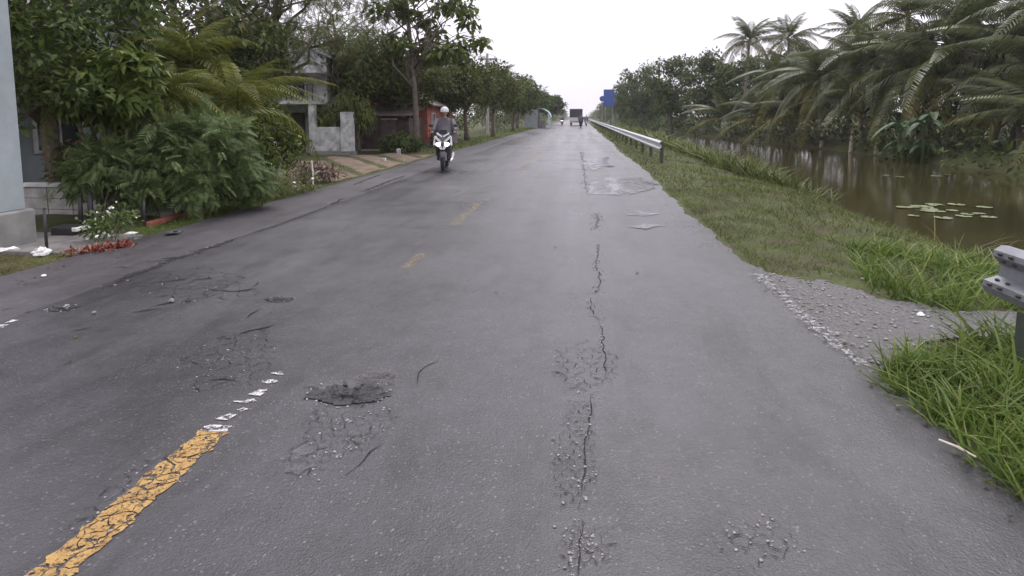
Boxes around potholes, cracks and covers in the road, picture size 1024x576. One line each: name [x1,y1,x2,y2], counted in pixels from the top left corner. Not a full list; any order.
pothole [303,380,392,408]
crack [283,403,405,481]
crack [128,256,260,312]
crack [177,310,275,392]
